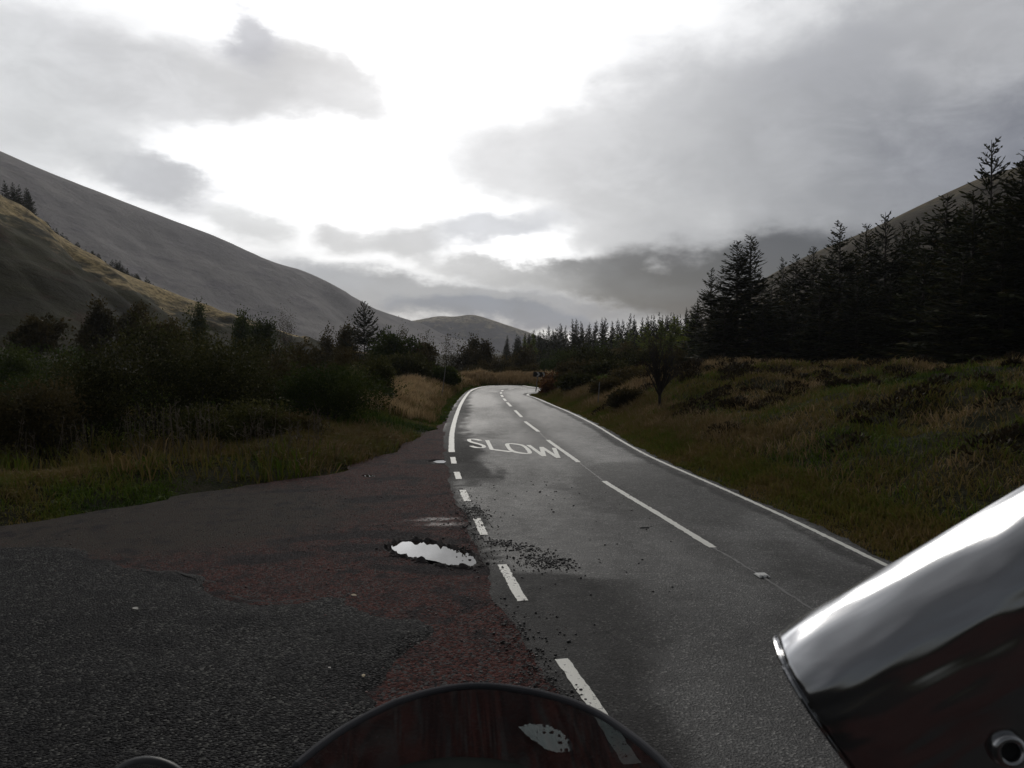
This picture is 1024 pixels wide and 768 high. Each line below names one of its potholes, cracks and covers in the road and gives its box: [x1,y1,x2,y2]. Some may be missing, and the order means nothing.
pothole [382,537,482,569]
